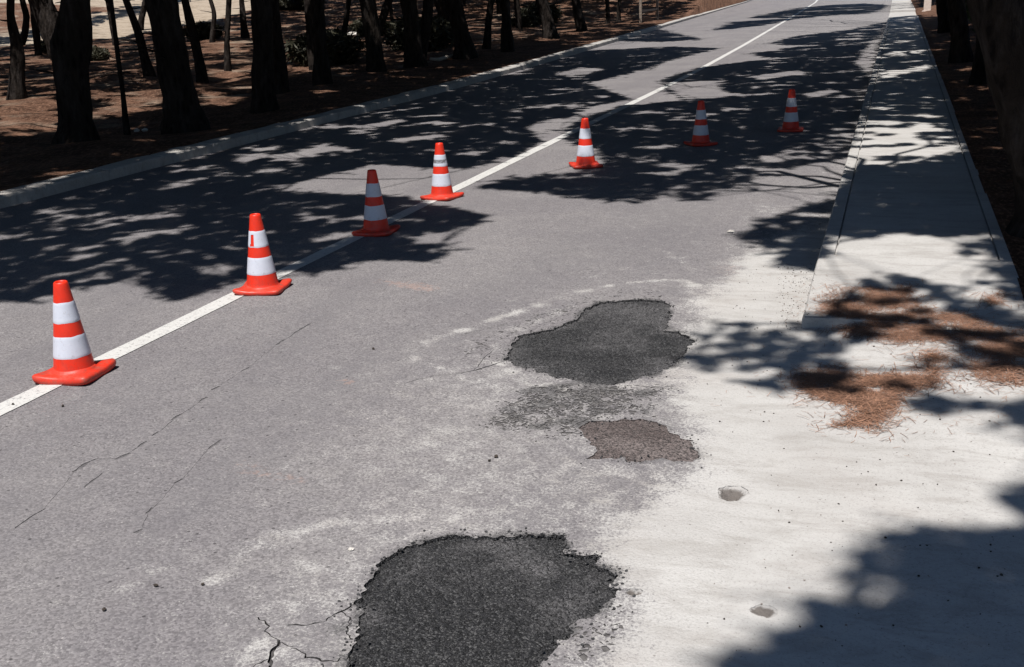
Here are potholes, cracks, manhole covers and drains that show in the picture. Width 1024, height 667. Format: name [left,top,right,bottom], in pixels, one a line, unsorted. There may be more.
pothole [718,486,750,501]
crack [15,324,310,528]
pothole [749,604,778,618]
crack [253,604,354,667]
